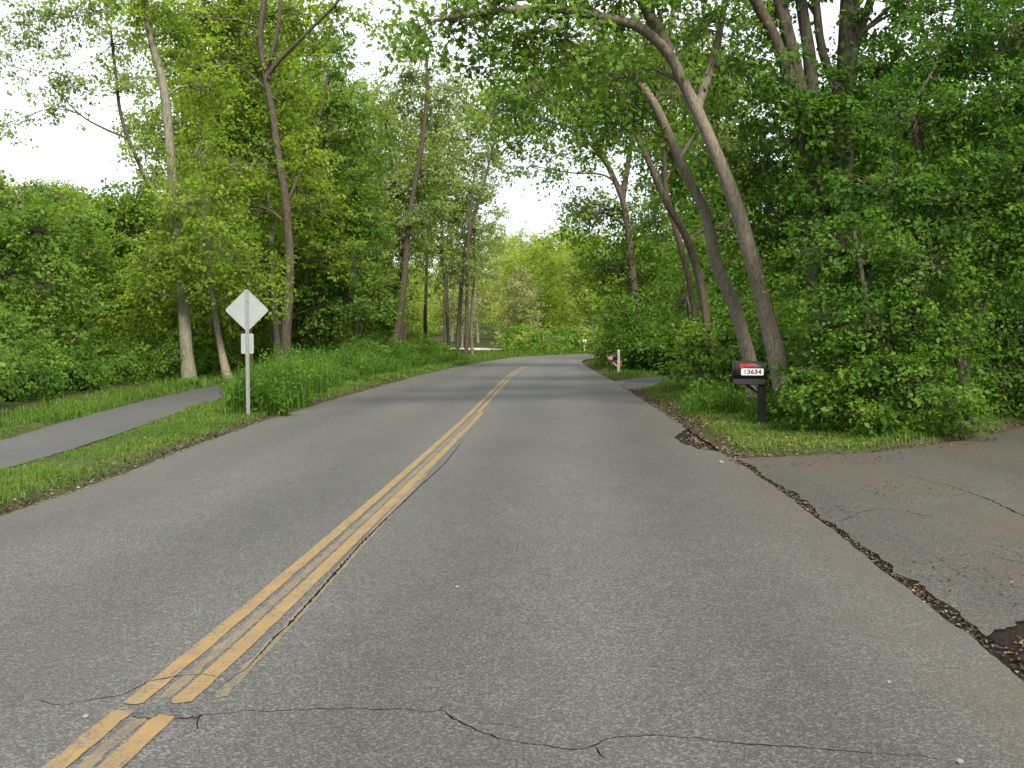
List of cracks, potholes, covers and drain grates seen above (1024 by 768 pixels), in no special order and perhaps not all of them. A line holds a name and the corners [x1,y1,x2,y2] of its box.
pothole [987,620,1024,661]
crack [734,459,1024,681]
crack [180,706,968,768]
